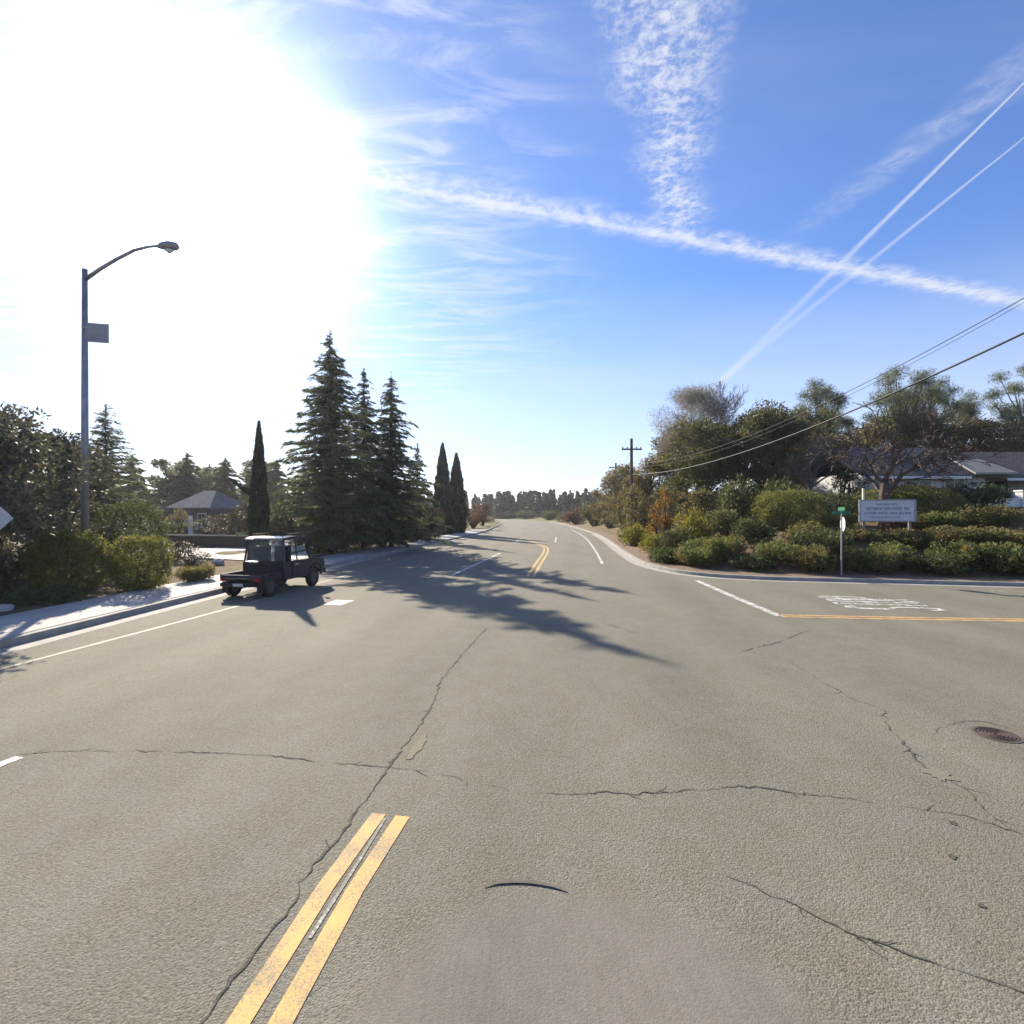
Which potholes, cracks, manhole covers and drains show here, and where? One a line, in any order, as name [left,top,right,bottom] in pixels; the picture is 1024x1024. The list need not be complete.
manhole cover [970,726,1024,743]
crack [21,629,1019,1024]
